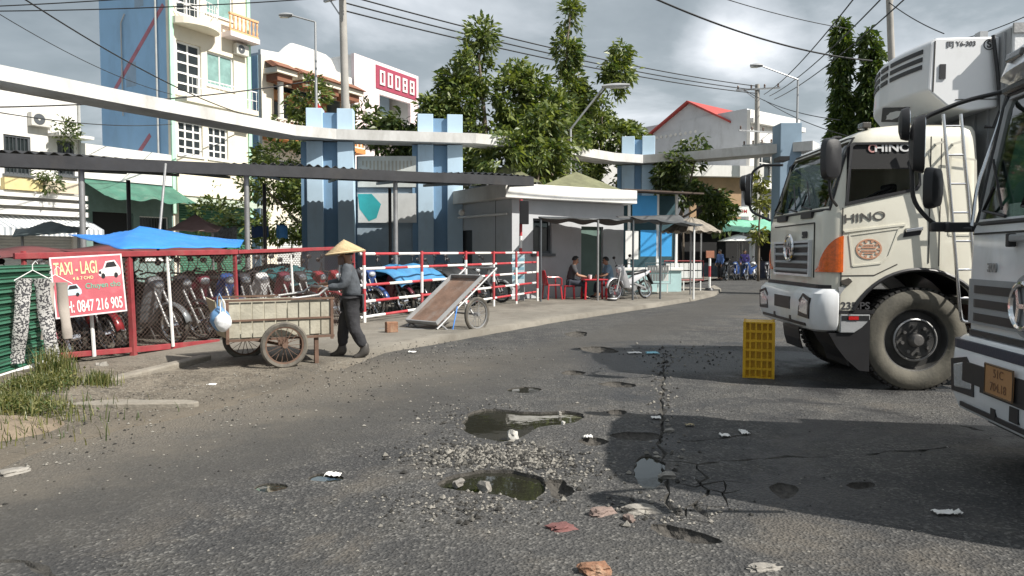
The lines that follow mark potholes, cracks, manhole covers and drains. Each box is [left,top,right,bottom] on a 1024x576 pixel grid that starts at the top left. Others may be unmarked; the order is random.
pothole [610,432,663,441]
pothole [254,483,288,492]
crack [867,426,983,455]
pothole [634,455,666,489]
pothole [308,473,344,482]
pothole [769,483,799,499]
pothole [650,524,722,544]
pothole [437,470,546,501]
pothole [461,409,584,442]
pothole [544,479,575,499]
crack [656,353,829,524]
